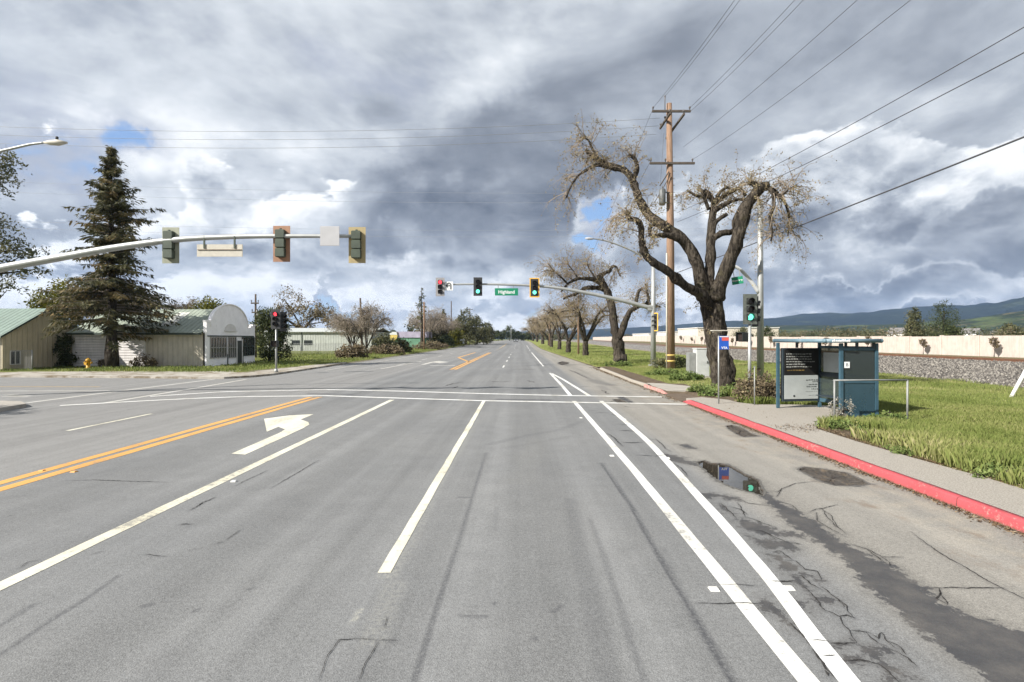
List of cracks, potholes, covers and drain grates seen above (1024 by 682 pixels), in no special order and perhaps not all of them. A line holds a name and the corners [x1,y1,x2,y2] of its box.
crack [714,501,916,682]
pothole [696,460,767,496]
